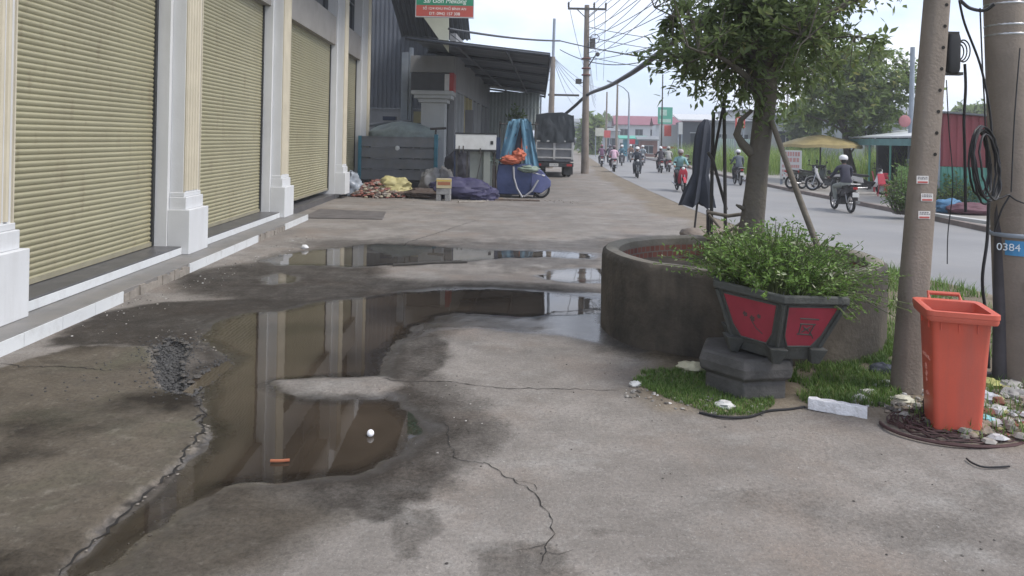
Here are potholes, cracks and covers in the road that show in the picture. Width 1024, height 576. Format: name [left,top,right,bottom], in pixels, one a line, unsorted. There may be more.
crack [443,415,571,563]
crack [387,378,606,391]
